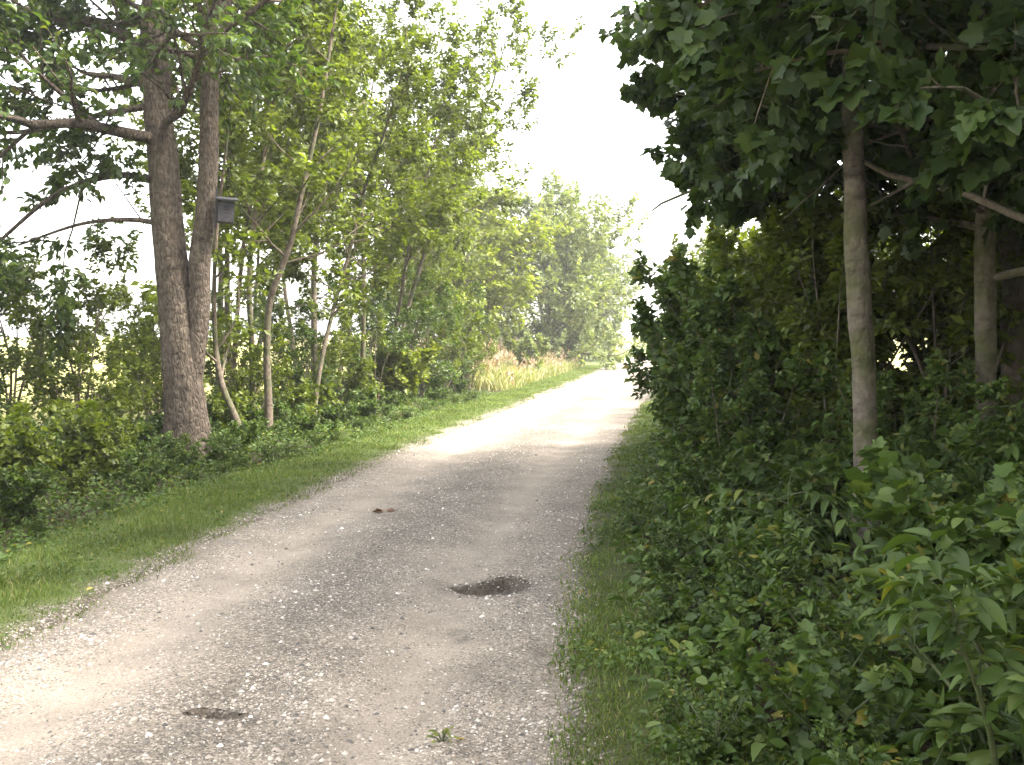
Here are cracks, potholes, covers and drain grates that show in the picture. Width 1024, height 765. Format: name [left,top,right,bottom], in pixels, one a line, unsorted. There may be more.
pothole [182,708,249,721]
pothole [450,576,532,597]
